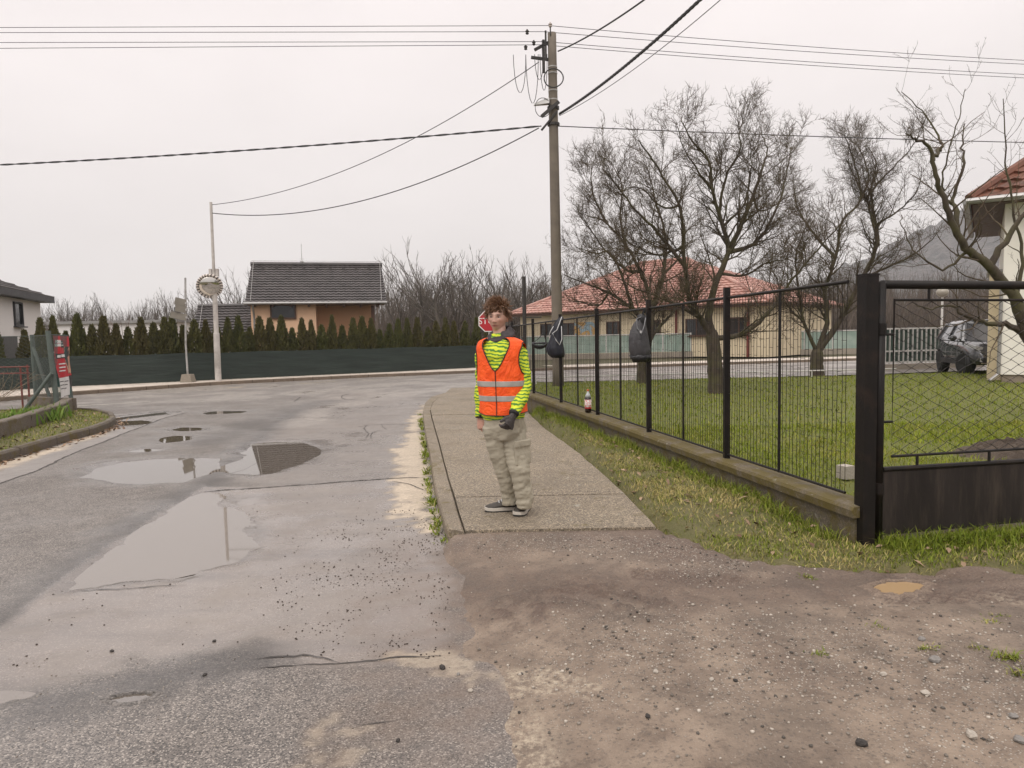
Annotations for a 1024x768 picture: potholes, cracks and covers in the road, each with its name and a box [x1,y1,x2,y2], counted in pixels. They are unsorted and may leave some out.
pothole [858,578,938,600]
pothole [99,690,164,706]
crack [253,654,336,662]
crack [206,477,425,492]
